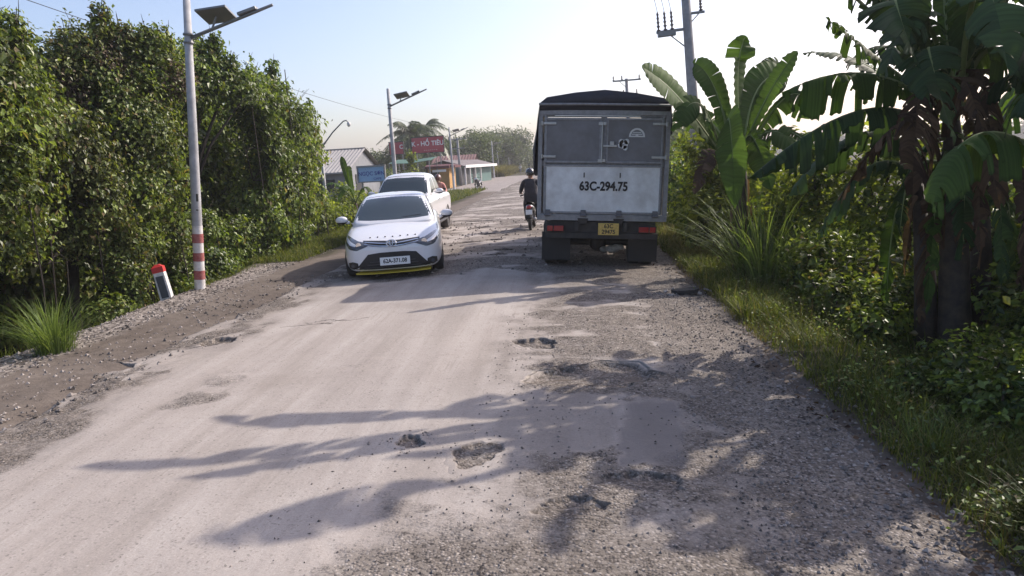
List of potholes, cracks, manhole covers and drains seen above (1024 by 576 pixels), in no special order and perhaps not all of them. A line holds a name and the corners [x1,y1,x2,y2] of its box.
pothole [515,359,671,389]
pothole [189,335,243,349]
pothole [442,436,515,476]
pothole [384,430,437,453]
pothole [504,336,563,351]
